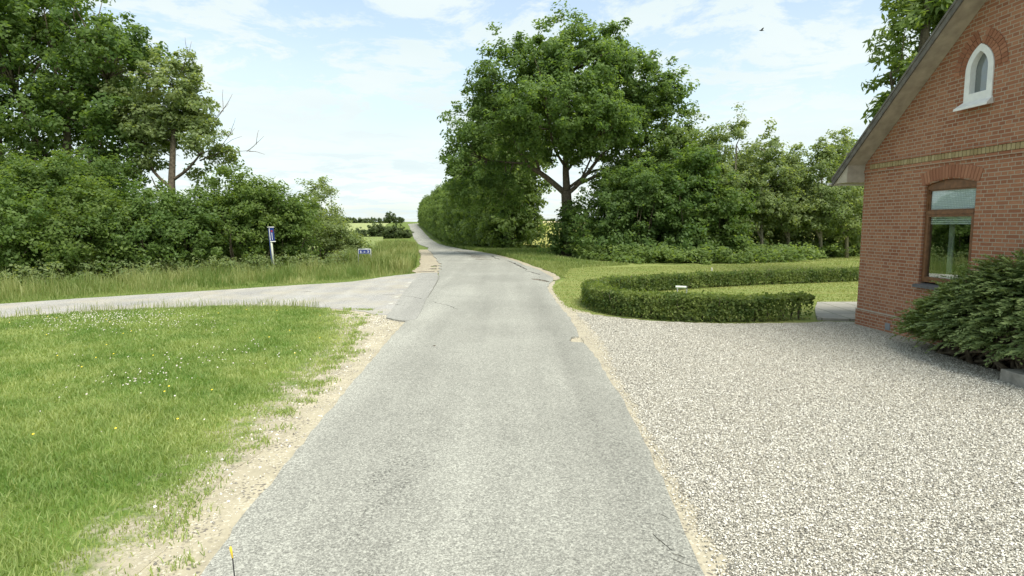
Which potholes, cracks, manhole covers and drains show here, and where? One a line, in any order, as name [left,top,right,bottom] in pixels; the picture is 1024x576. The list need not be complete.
crack [653,514,694,568]
